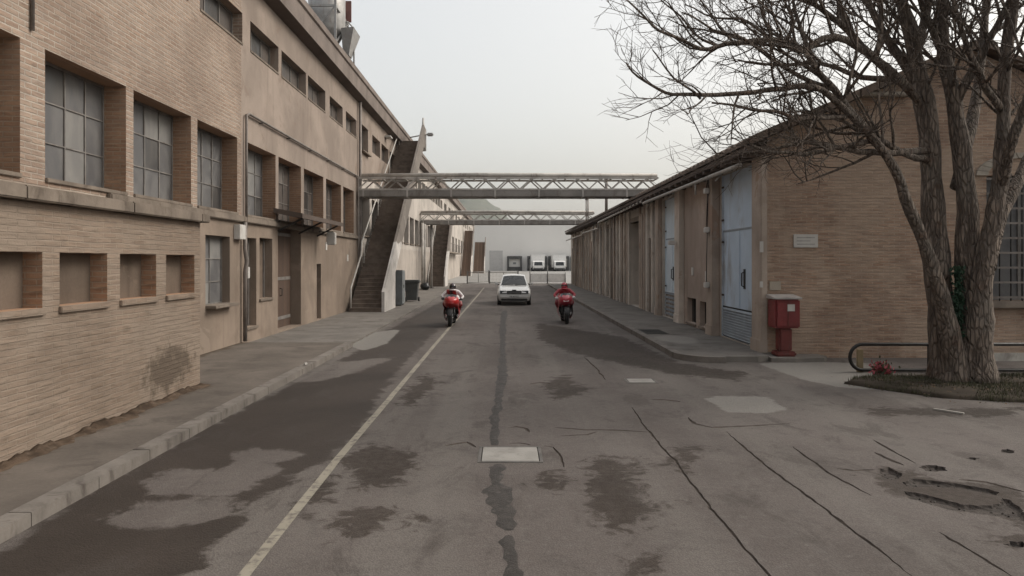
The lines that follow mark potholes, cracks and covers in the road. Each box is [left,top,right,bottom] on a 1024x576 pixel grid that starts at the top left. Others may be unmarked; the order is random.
pothole [880,467,902,480]
pothole [904,491,1024,521]
crack [653,399,789,428]
crack [837,440,914,471]
pothole [902,479,999,496]
manhole cover [477,446,543,463]
